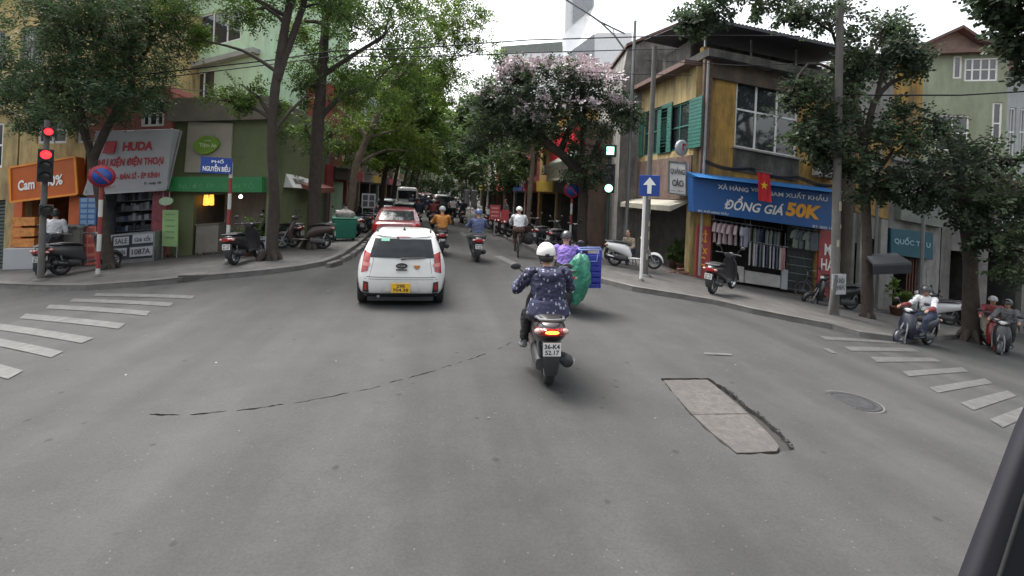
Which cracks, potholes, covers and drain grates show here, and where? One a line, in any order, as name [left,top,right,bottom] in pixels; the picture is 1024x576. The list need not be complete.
crack [150,344,508,416]
manhole cover [825,390,887,414]
